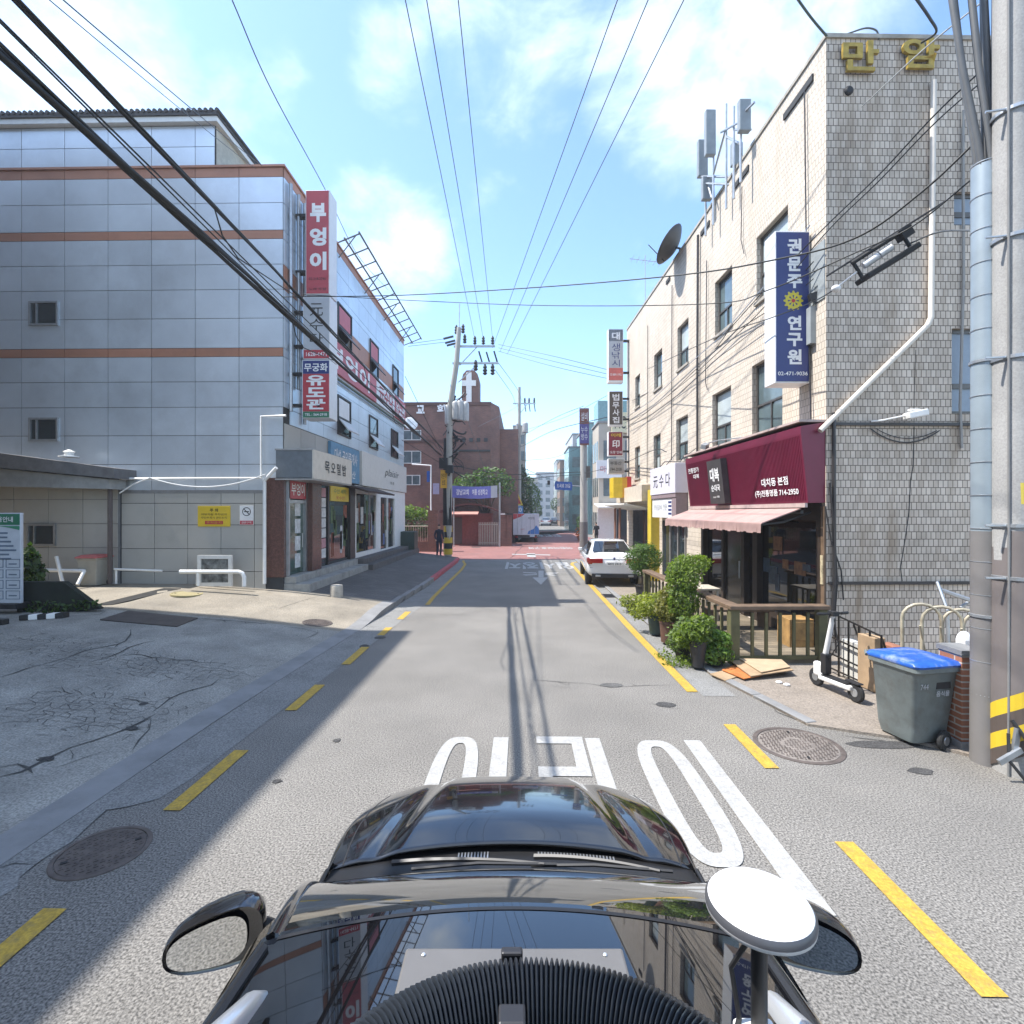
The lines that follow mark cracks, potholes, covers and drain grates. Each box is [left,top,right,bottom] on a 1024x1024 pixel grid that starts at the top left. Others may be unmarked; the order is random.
crack [2,685,202,776]
crack [0,629,291,685]
crack [0,801,148,877]
manhole cover [302,619,333,627]
manhole cover [753,727,847,765]
manhole cover [46,825,153,881]
